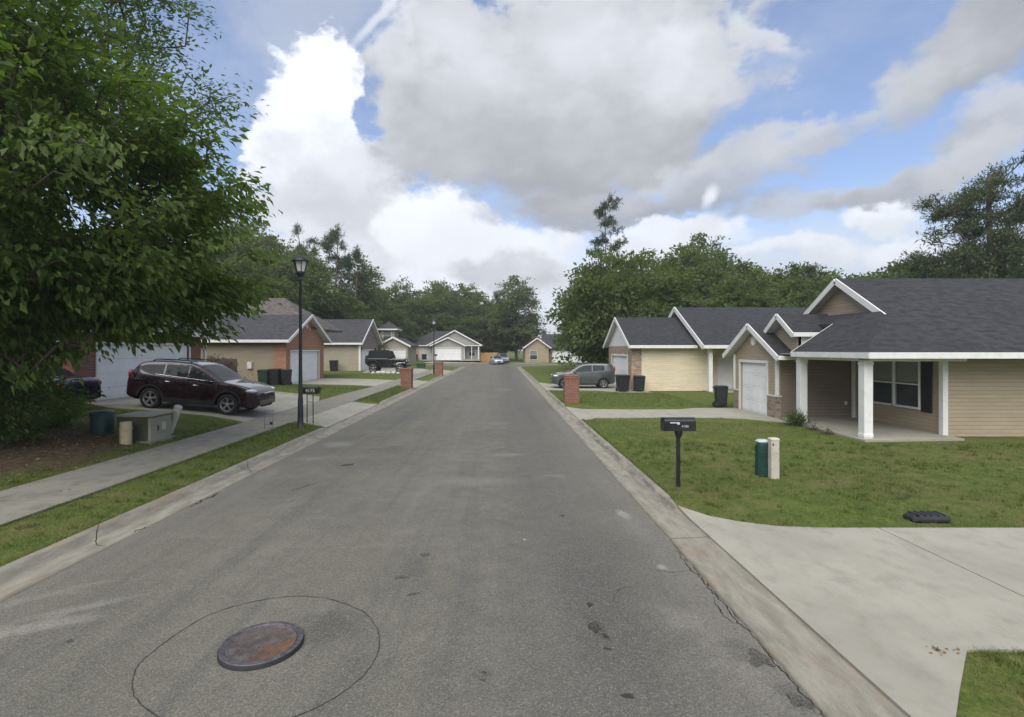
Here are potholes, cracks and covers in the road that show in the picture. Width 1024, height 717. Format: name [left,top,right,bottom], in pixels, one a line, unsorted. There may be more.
crack [654,551,823,716]
manhole cover [217,621,304,672]
